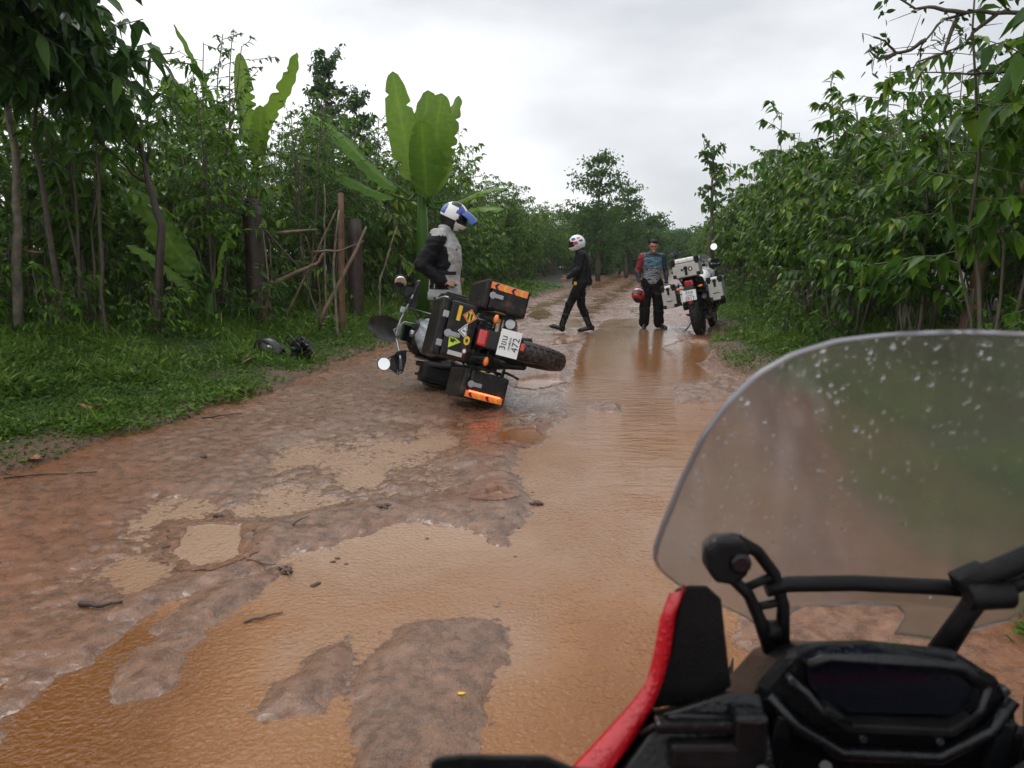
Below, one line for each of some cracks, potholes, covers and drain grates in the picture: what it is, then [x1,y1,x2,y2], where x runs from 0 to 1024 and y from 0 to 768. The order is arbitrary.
pothole [159,518,260,571]
pothole [487,423,549,448]
